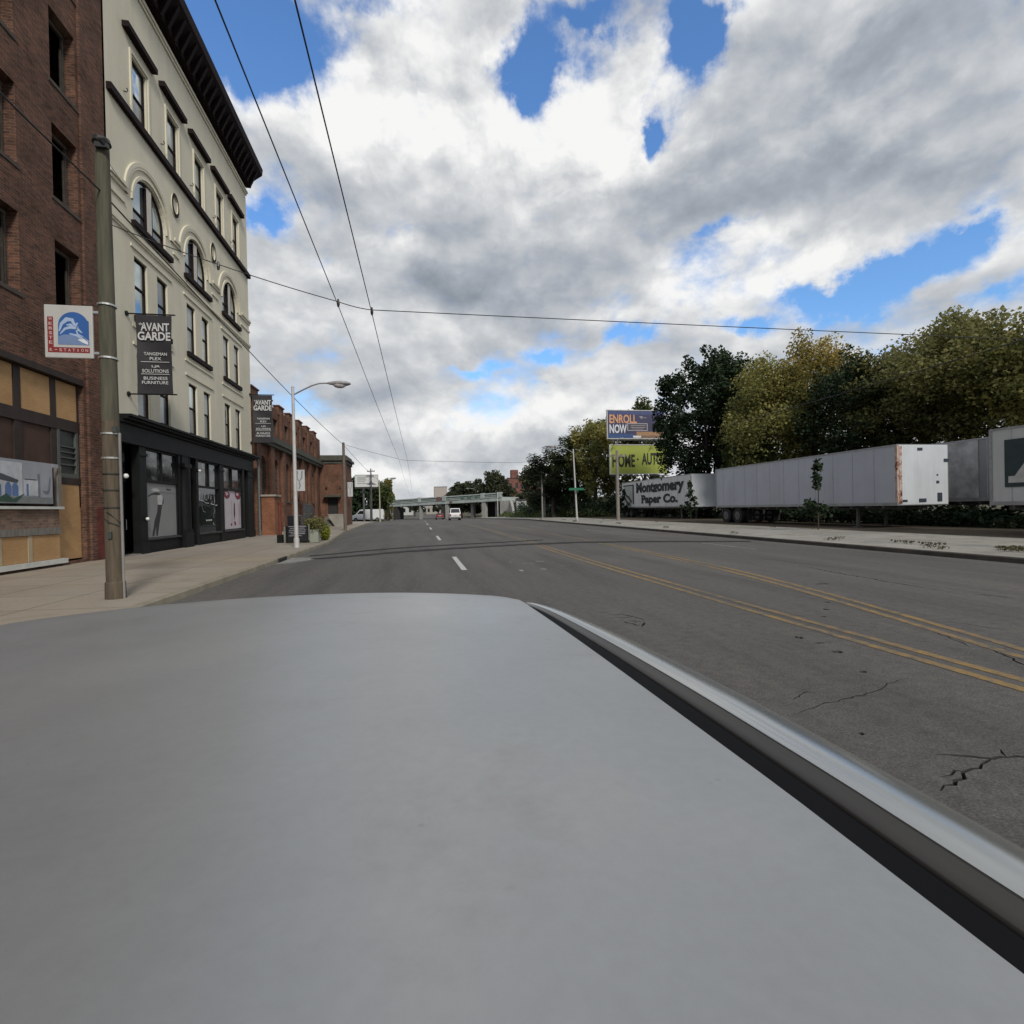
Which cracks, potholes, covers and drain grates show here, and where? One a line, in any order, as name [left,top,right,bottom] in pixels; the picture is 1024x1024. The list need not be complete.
crack [793,678,906,714]
crack [936,750,1024,791]
